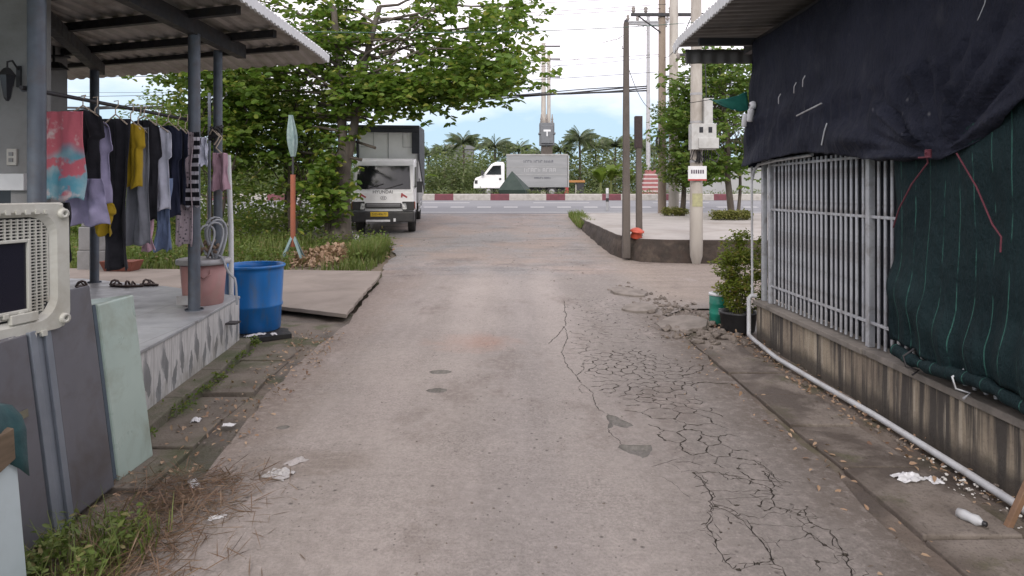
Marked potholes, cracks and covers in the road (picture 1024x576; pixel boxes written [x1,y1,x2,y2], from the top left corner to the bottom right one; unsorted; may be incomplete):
crack [551,297,869,576]
